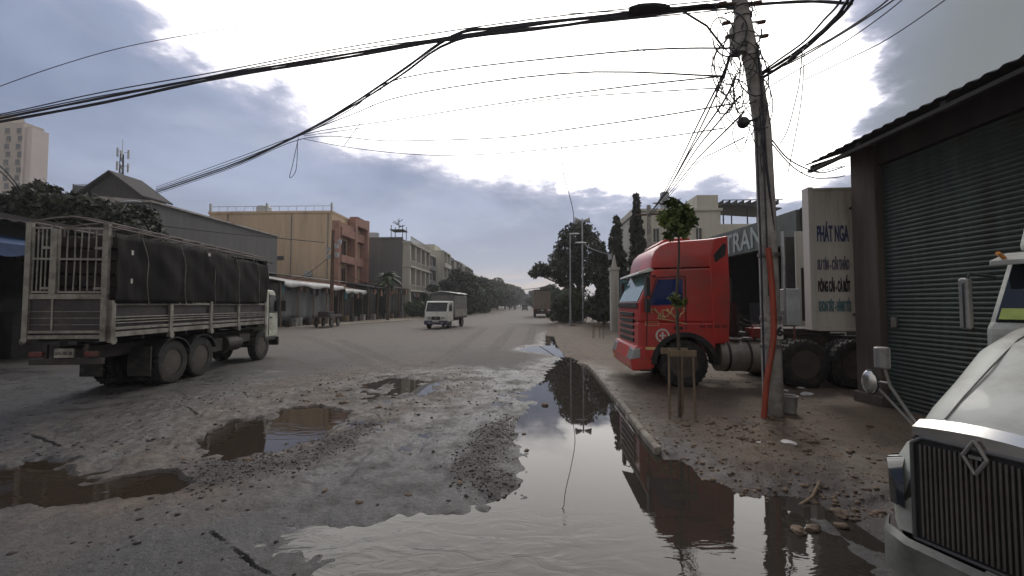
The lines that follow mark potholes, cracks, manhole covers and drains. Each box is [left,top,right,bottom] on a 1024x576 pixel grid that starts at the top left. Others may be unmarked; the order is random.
pothole [0,455,201,510]
crack [171,404,203,417]
pothole [340,373,461,405]
crack [19,432,62,447]
crack [207,530,276,576]
pothole [191,404,356,459]
